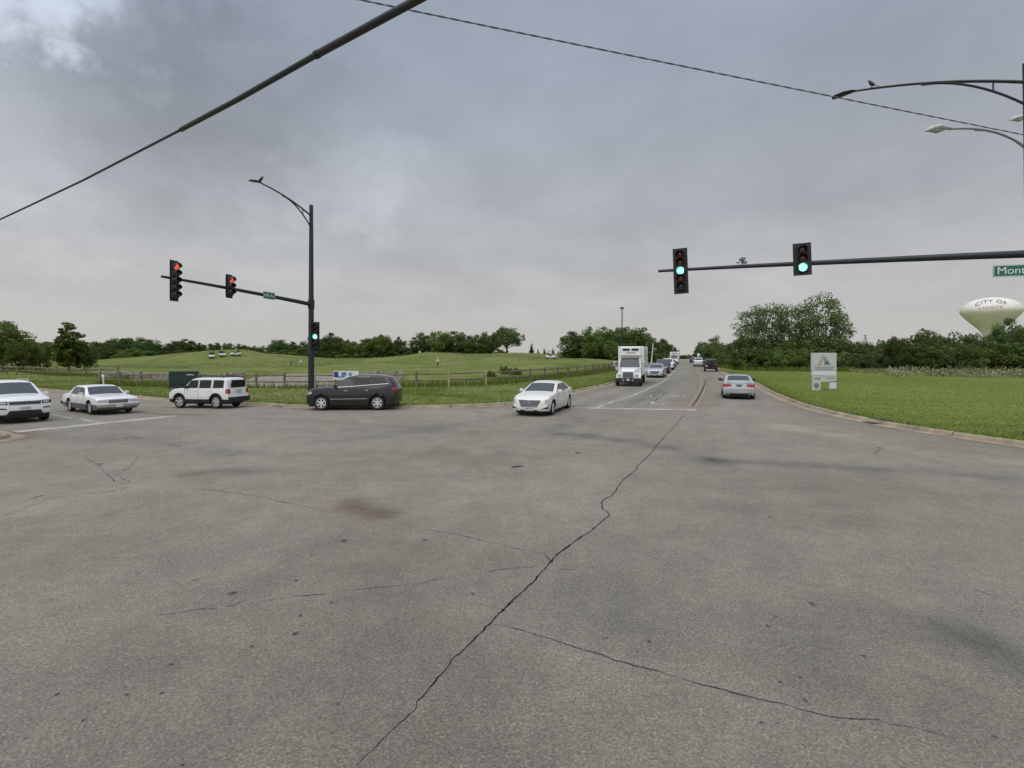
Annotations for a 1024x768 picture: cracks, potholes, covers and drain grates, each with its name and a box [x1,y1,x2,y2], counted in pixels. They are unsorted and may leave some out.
crack [257,416,950,760]
crack [4,455,139,516]
